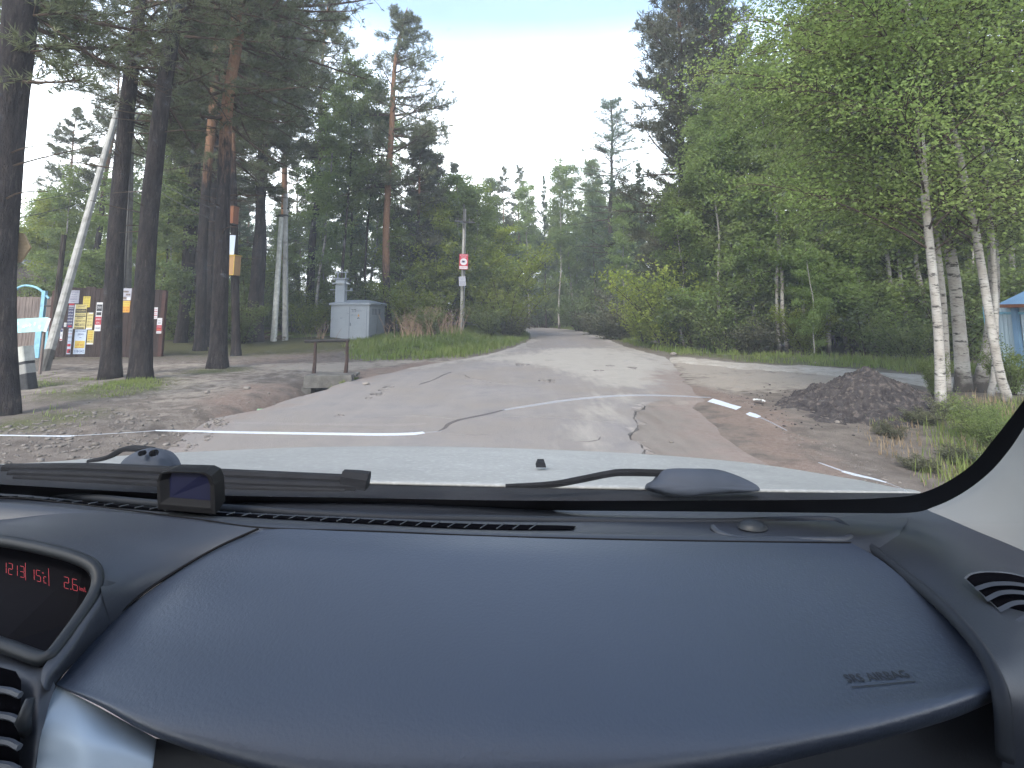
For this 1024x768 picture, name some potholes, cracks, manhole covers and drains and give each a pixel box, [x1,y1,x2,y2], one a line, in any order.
crack [628,406,646,454]
crack [319,416,607,442]
crack [419,372,501,385]
